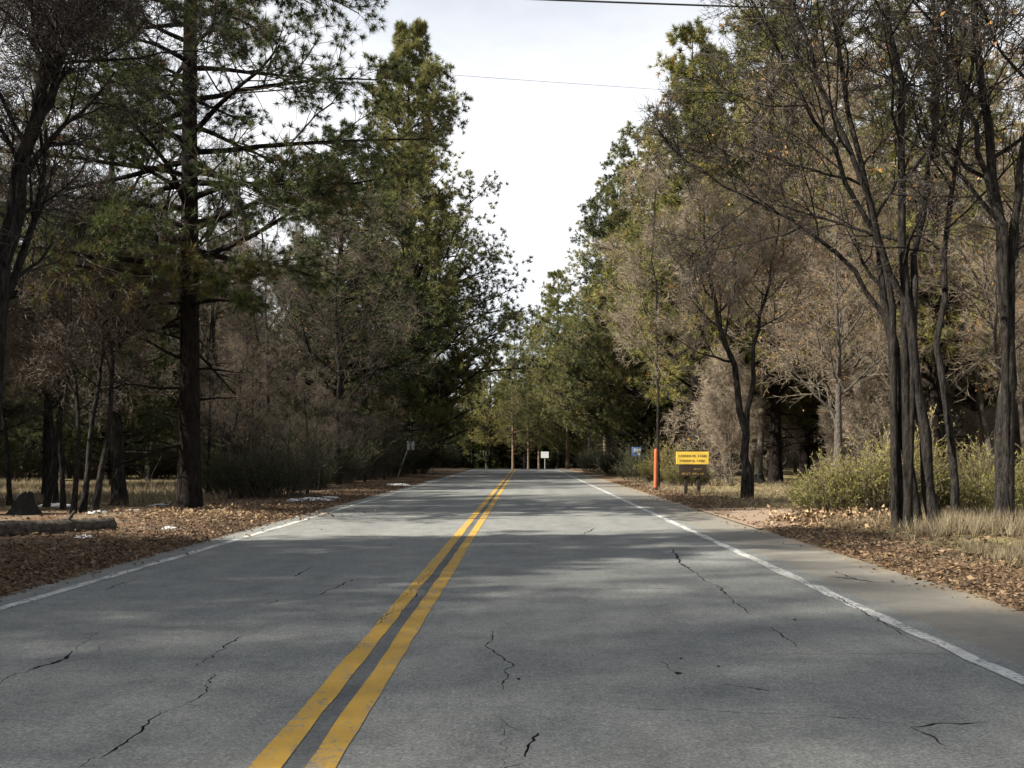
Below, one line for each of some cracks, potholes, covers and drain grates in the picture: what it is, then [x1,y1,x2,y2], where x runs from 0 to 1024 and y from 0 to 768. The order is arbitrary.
crack [81,636,241,766]
crack [0,631,100,684]
crack [772,628,928,654]
crack [658,550,750,614]
crack [485,630,514,690]
crack [500,719,539,768]
crack [619,706,987,747]
